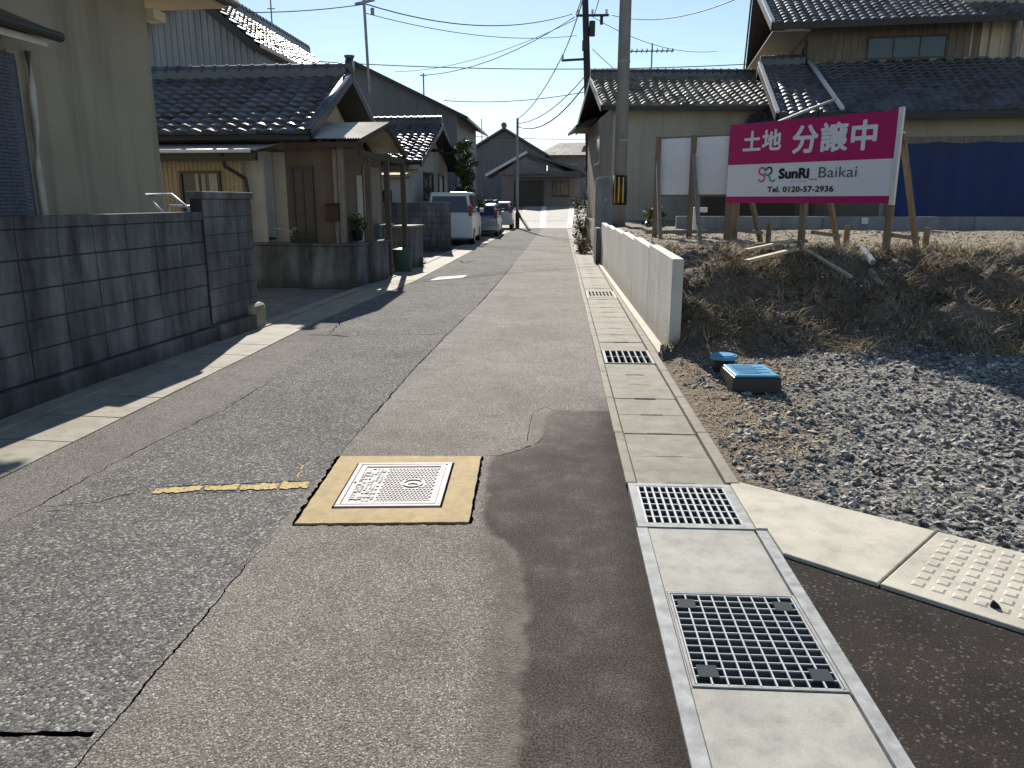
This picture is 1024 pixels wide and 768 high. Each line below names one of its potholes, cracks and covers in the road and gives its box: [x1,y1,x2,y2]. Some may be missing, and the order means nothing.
drain grate [602,350,655,365]
drain grate [627,483,756,532]
drain grate [667,592,850,695]
manhole cover [292,456,484,526]
